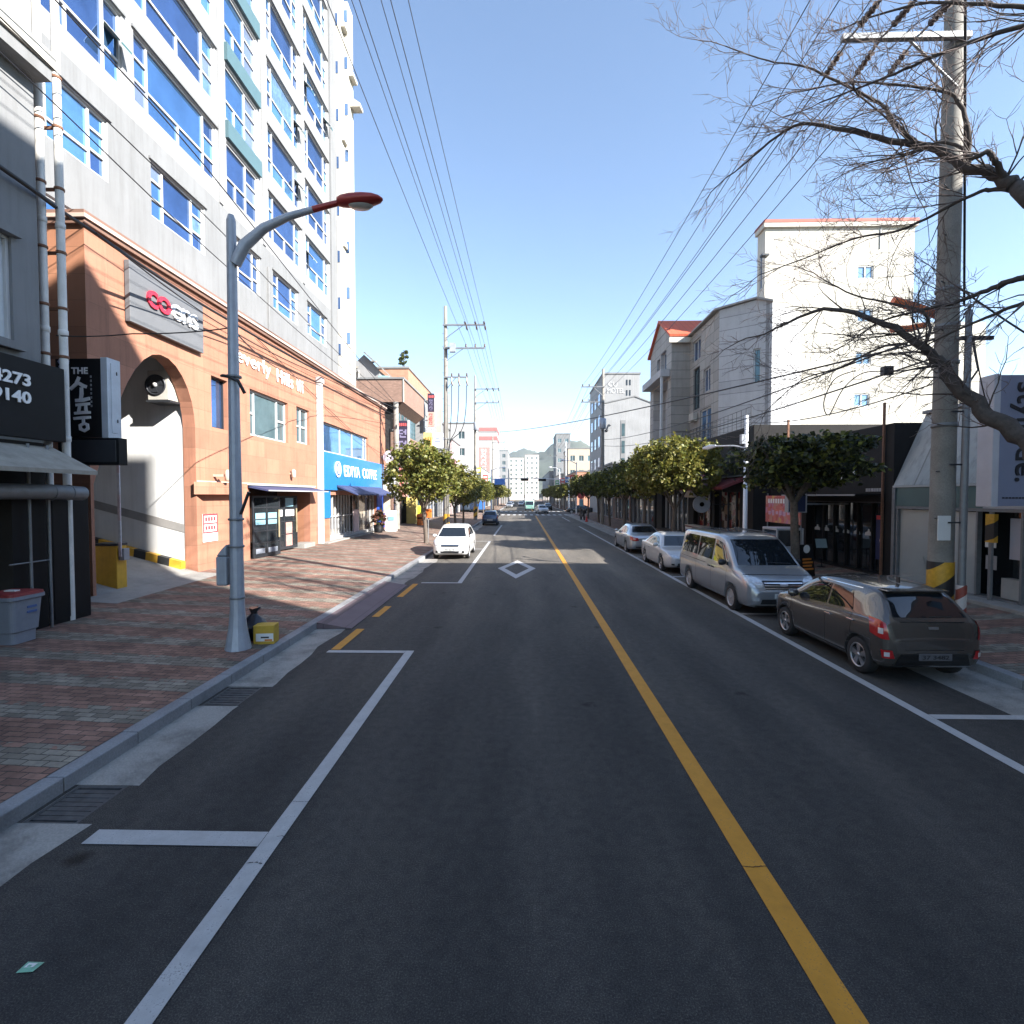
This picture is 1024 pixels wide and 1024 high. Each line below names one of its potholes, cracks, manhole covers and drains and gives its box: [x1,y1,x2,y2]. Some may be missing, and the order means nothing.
drain grate [23,786,128,824]
drain grate [202,687,262,706]
